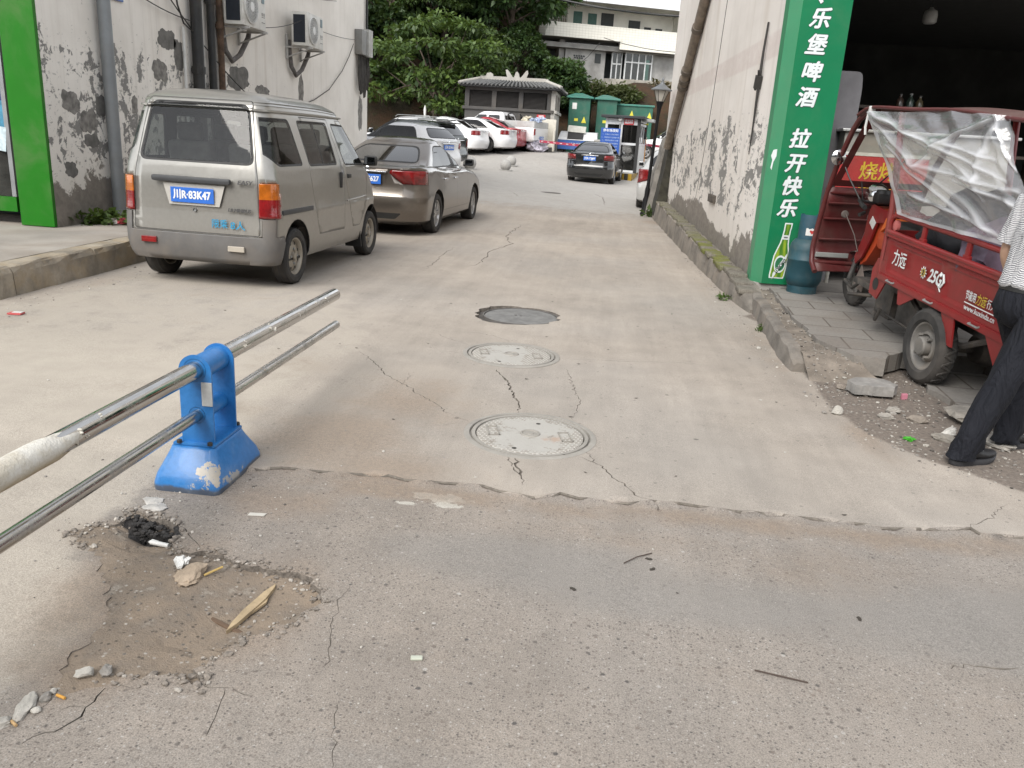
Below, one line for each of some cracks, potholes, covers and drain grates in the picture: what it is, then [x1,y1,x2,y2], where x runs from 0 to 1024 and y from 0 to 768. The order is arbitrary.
manhole cover [463,342,560,368]
crack [360,352,465,425]
crack [496,370,521,413]
crack [323,587,350,766]
manhole cover [483,308,559,325]
crack [201,683,253,736]
pothole [49,505,335,695]
manhole cover [464,413,596,460]
crack [22,685,139,744]
